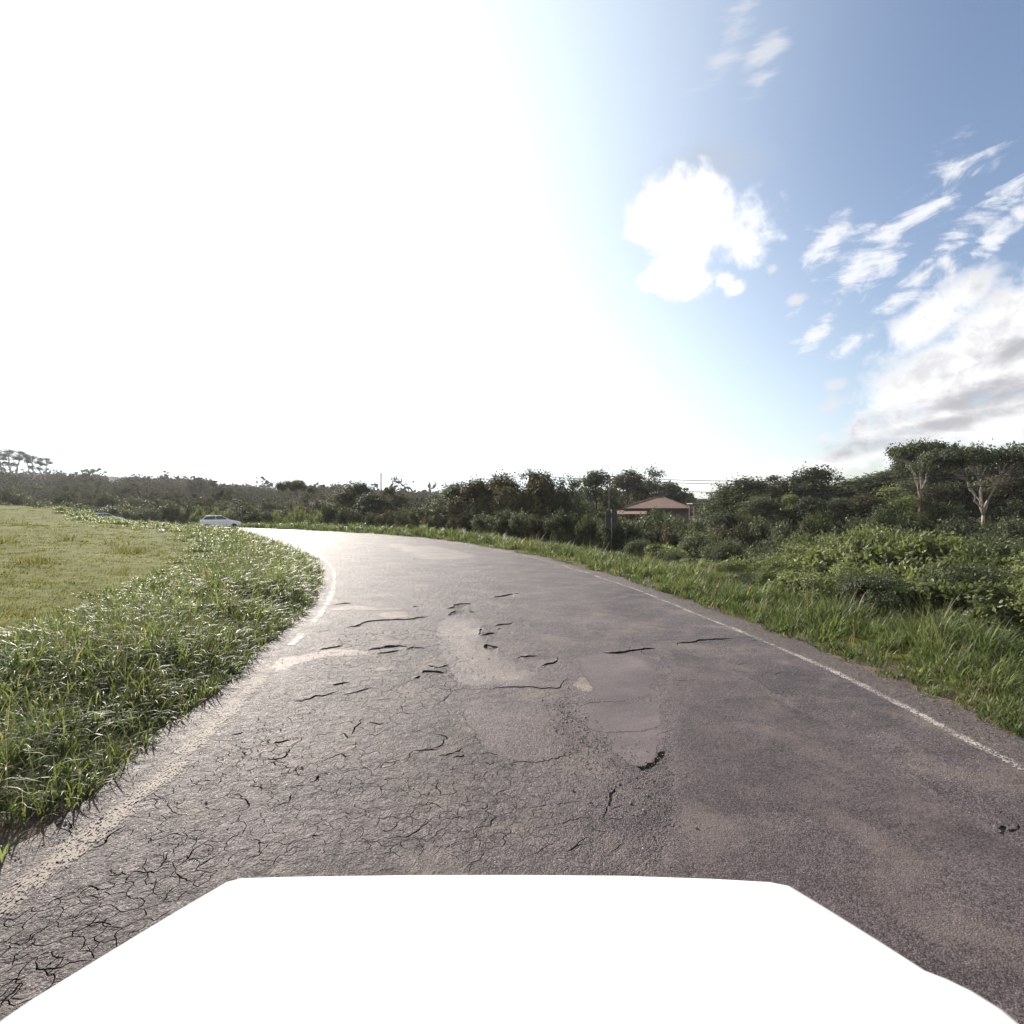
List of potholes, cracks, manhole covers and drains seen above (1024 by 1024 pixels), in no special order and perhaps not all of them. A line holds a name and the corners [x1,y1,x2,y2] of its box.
pothole [447,603,474,616]
crack [0,590,627,1007]
crack [604,646,656,655]
pothole [636,751,665,771]
